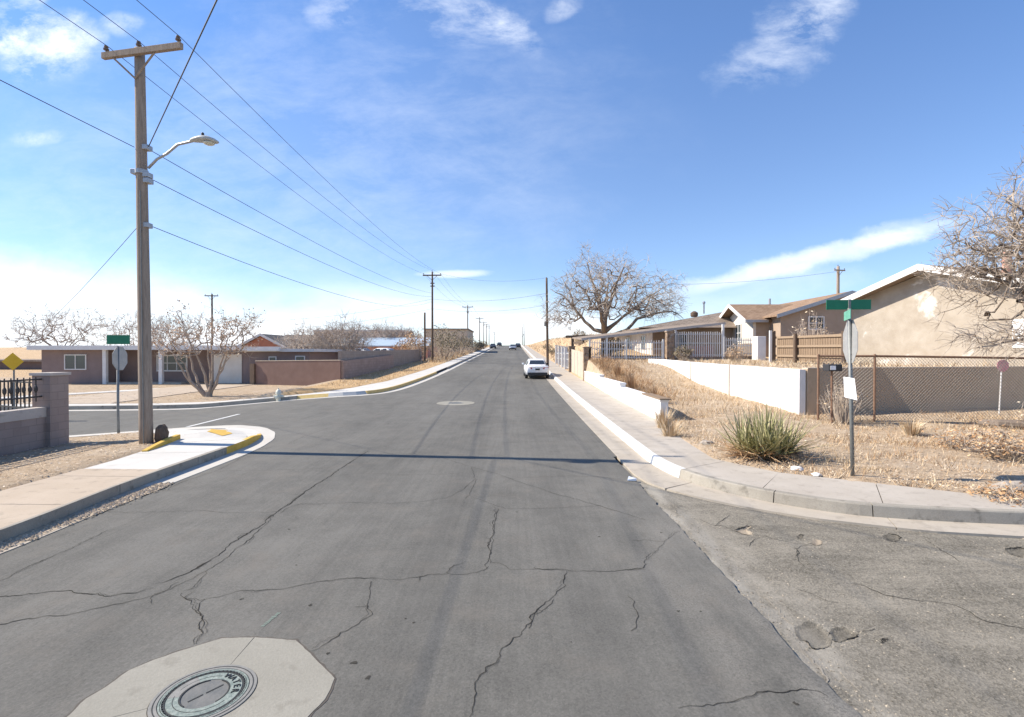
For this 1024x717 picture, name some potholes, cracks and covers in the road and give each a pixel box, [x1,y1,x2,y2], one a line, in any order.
pothole [830,627,858,642]
crack [0,451,678,717]
manhole cover [65,636,336,717]
crack [854,583,1020,628]
pothole [1005,546,1024,557]
pothole [883,533,902,542]
pothole [794,622,832,649]
crack [680,644,861,708]
